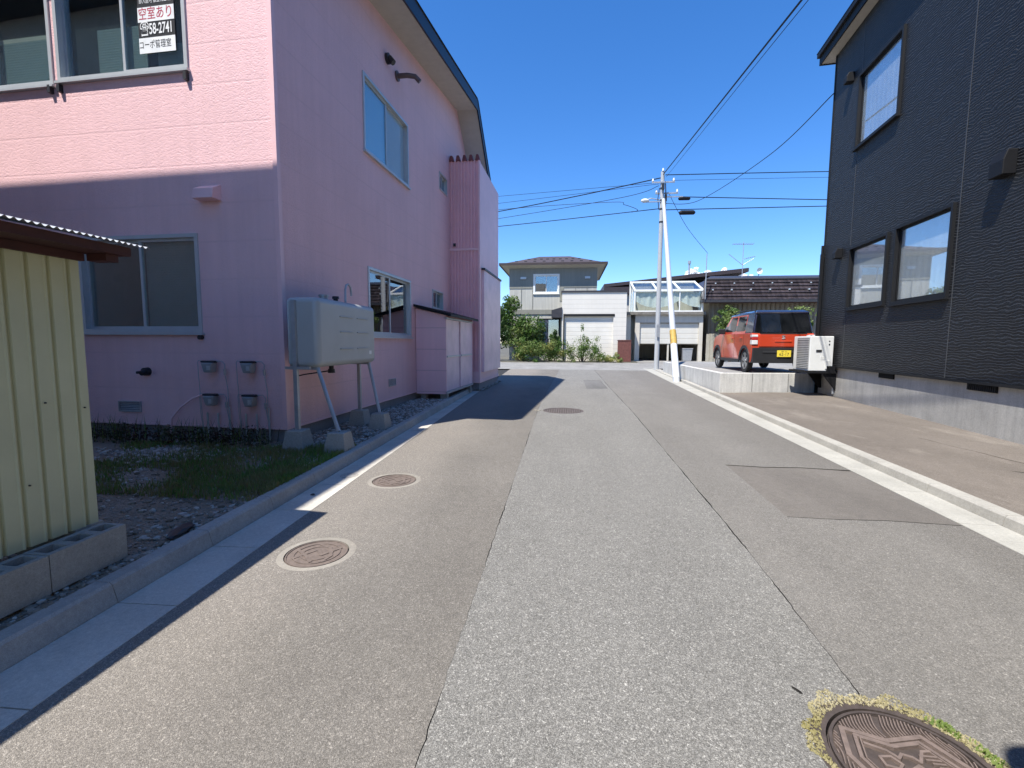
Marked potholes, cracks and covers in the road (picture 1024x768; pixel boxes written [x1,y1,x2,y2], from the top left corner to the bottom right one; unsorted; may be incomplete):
manhole cover [810,699,995,768]
manhole cover [276,537,356,571]
manhole cover [367,473,421,488]
